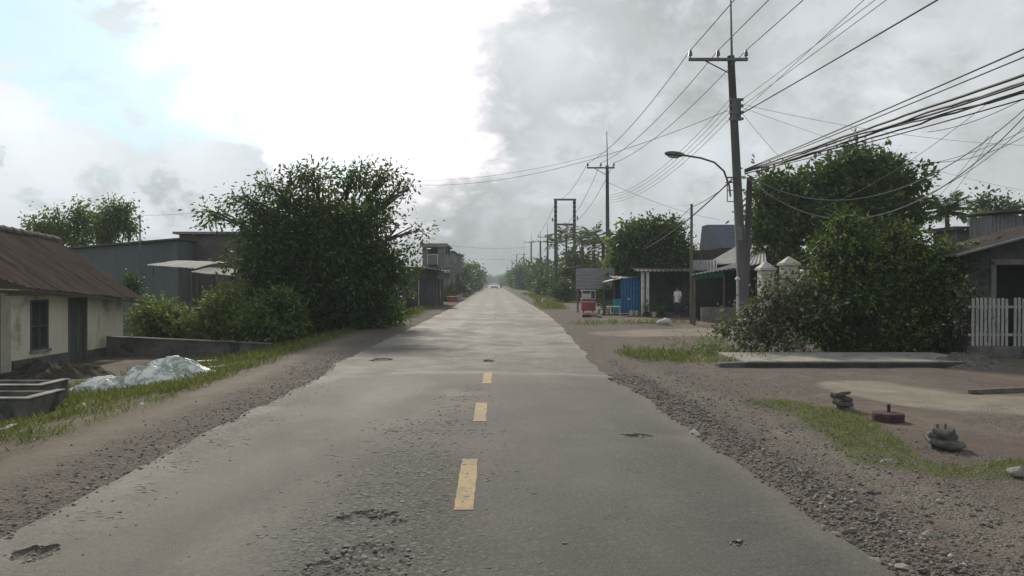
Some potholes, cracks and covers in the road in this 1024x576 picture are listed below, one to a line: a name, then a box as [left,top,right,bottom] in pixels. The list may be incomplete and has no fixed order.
pothole [3,543,61,563]
pothole [331,507,408,526]
pothole [301,541,418,576]
